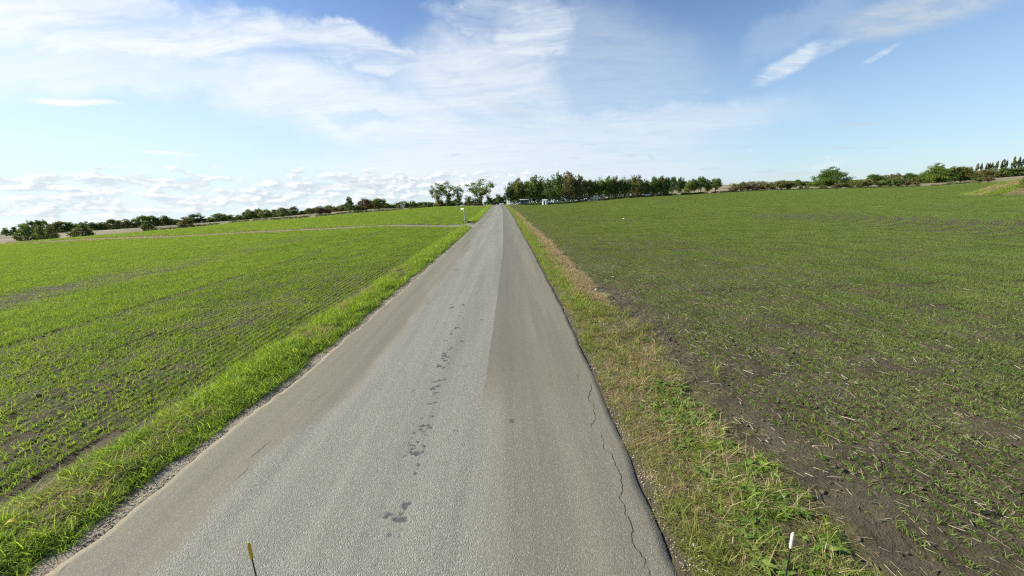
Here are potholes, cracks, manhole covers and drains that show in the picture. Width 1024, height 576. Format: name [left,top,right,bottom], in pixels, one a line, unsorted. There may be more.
crack [577,371,650,576]
